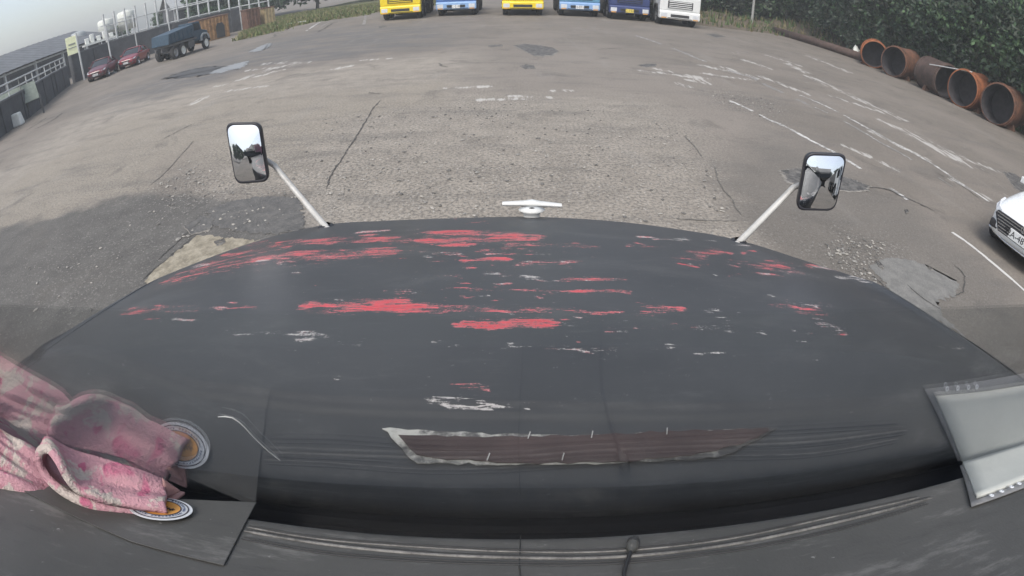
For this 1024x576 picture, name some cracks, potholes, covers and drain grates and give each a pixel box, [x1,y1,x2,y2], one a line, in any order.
crack [670,136,741,221]
crack [326,92,380,188]
